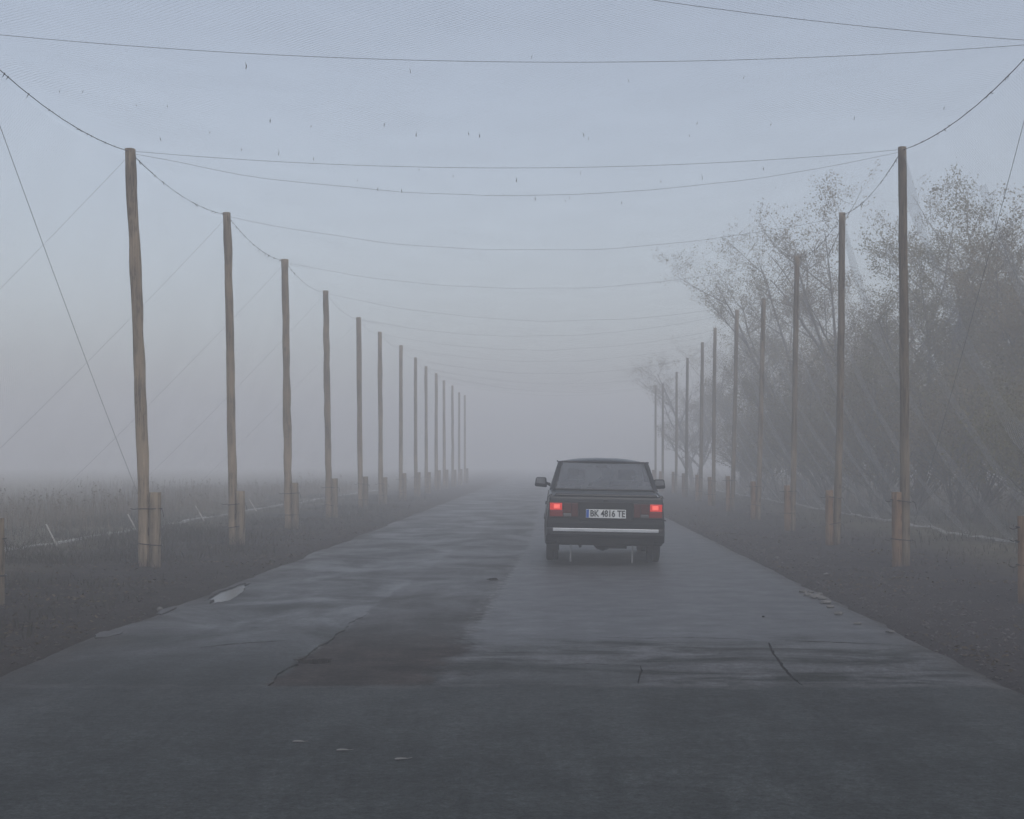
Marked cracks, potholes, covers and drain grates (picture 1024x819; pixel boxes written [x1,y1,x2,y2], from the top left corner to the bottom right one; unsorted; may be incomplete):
crack [769,641,867,684]
